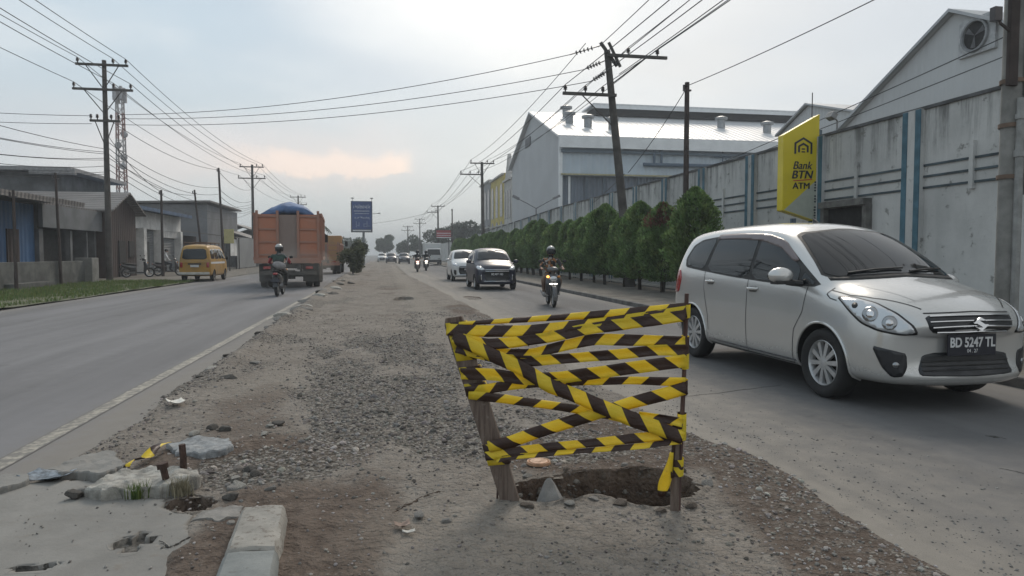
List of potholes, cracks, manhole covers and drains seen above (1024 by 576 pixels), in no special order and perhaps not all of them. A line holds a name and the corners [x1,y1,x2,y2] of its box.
pothole [5,560,60,574]
crack [677,385,780,398]
pothole [515,464,712,511]
pothole [106,532,164,557]
pothole [165,492,224,515]
crack [392,490,444,513]
